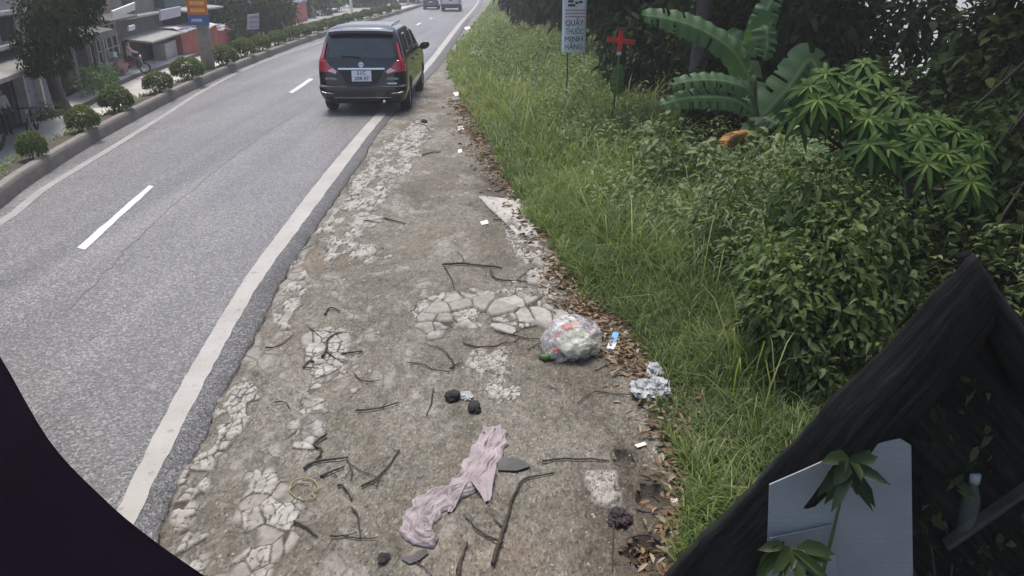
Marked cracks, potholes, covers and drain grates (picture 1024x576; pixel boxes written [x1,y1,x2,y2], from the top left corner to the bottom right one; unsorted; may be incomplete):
crack [65,61,574,576]
